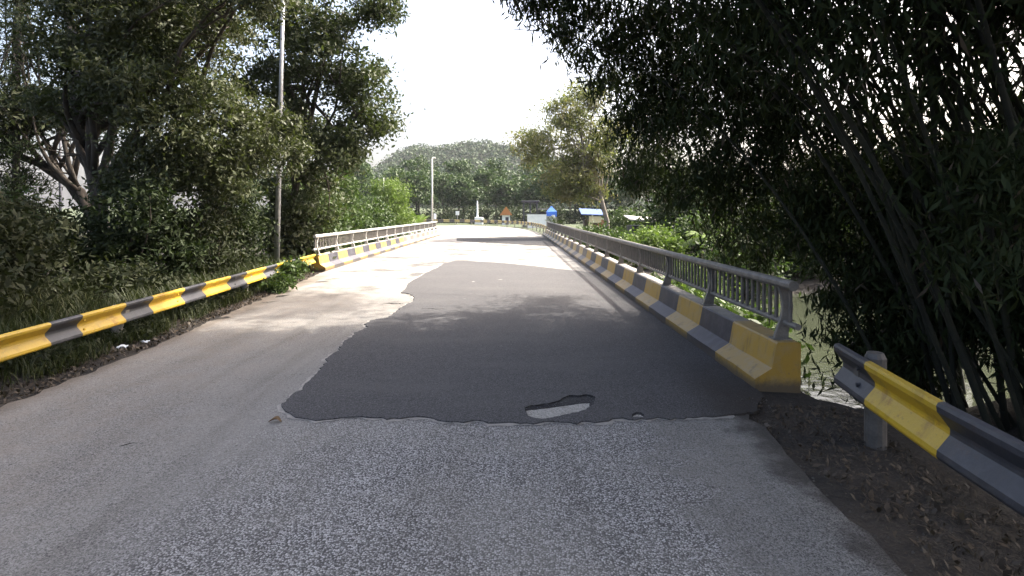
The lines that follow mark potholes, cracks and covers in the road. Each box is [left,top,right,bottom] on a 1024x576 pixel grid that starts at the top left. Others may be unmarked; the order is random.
pothole [525,394,596,419]
